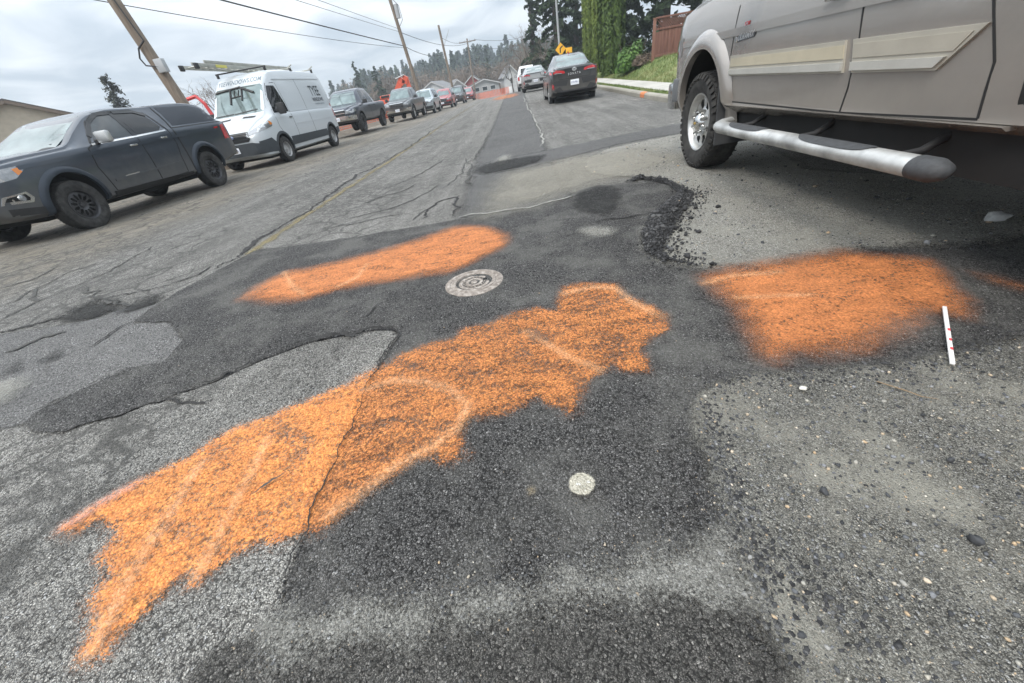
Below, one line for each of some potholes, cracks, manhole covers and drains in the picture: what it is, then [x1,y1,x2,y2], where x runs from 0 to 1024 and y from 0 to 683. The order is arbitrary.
crack [1,125,576,354]
manhole cover [445,269,503,297]
